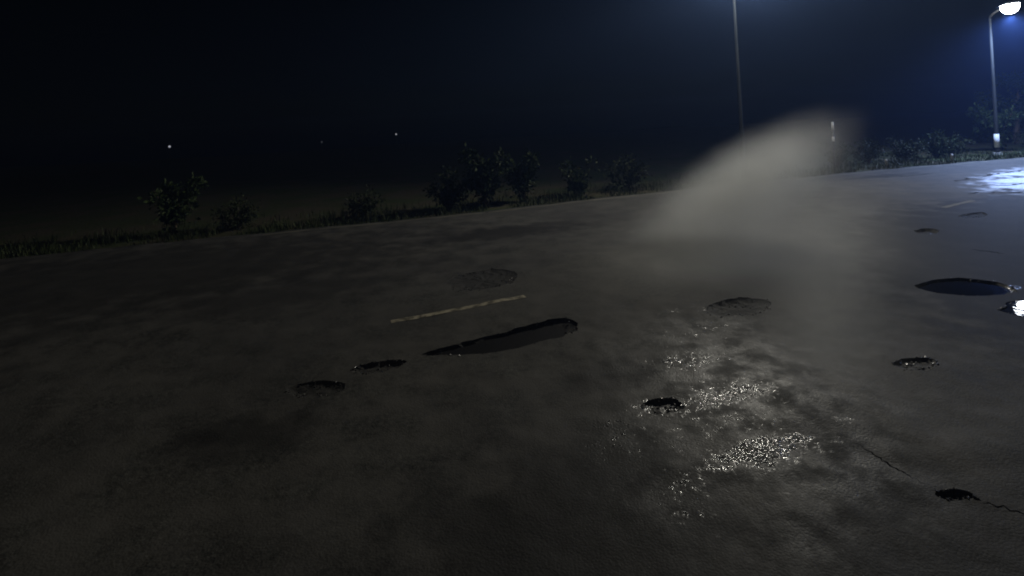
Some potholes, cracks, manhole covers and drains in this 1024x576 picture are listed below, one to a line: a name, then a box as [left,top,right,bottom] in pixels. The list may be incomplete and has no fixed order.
crack [861,445,925,484]
pothole [706,297,771,318]
pothole [640,397,685,415]
pothole [935,487,980,501]
pothole [419,318,578,356]
pothole [914,277,1017,296]
pothole [350,358,407,374]
pothole [892,356,940,370]
pothole [997,300,1024,316]
crack [983,502,1024,514]
pothole [285,380,347,398]
